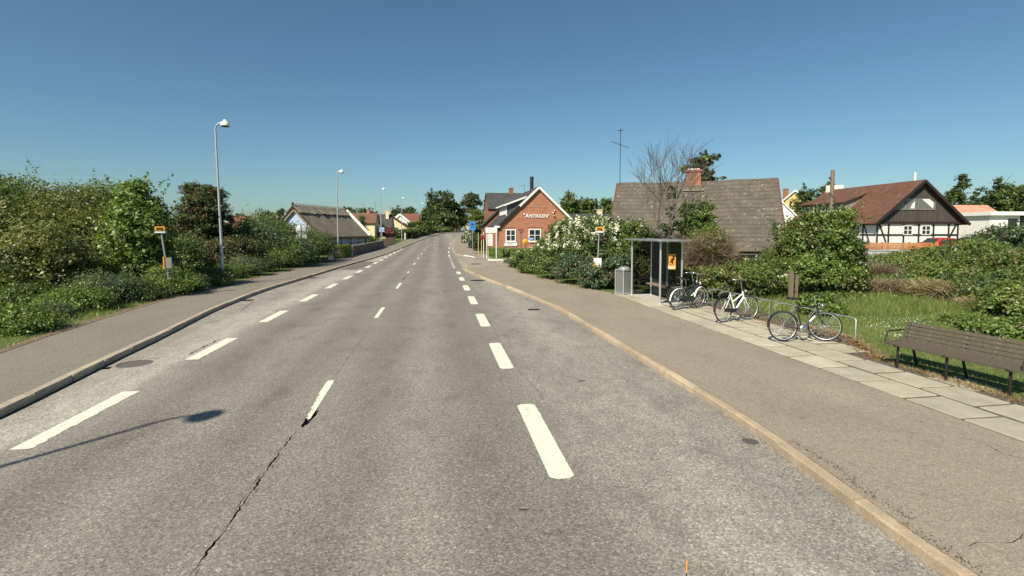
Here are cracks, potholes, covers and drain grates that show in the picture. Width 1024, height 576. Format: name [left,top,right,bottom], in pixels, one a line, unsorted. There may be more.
manhole cover [115,360,154,368]
crack [190,429,298,576]
